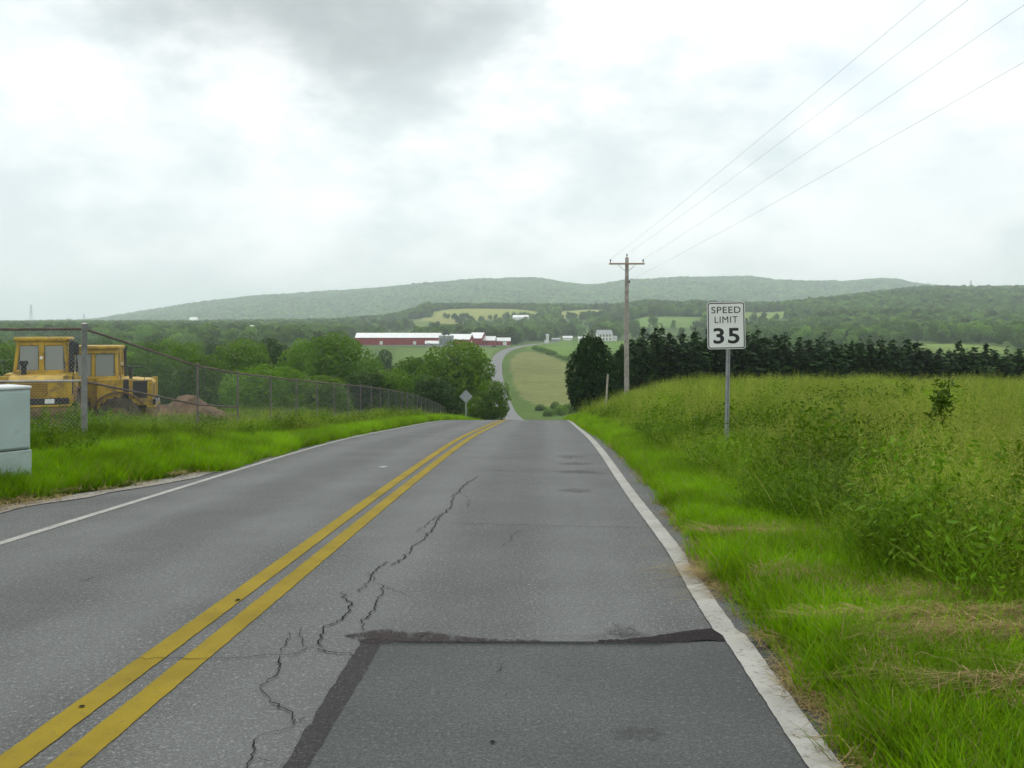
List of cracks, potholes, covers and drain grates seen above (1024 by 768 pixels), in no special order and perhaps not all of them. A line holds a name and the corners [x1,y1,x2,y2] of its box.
crack [142,469,648,768]
